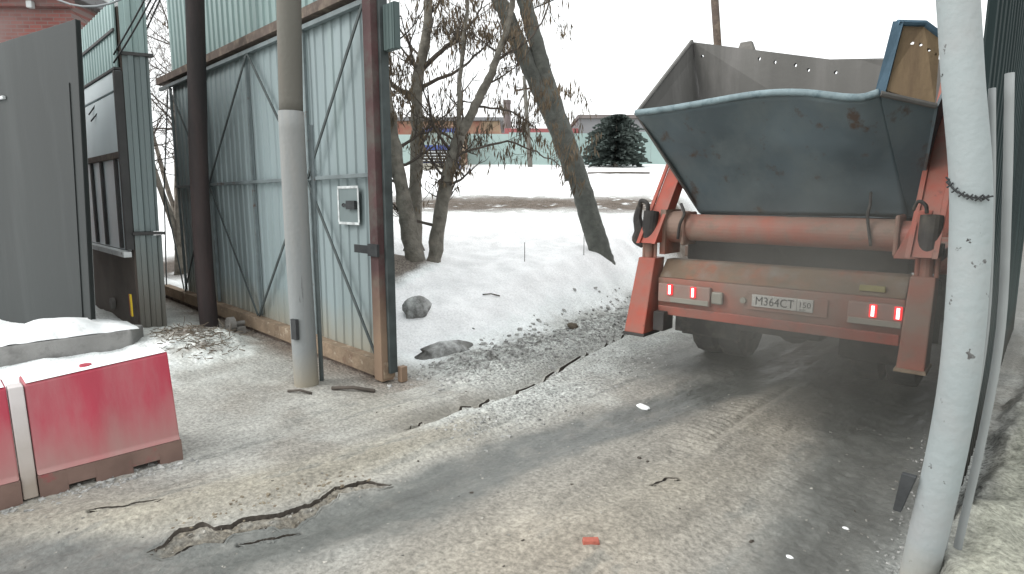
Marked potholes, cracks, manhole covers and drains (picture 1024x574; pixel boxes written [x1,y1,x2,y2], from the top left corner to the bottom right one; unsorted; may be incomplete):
crack [89,479,394,561]
crack [410,334,627,429]
crack [652,477,679,486]
